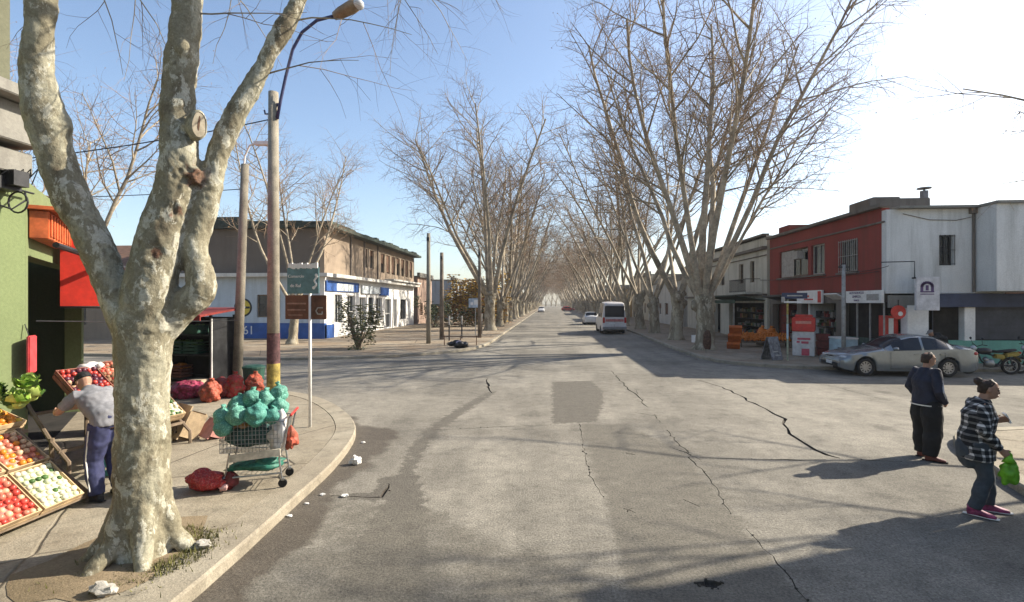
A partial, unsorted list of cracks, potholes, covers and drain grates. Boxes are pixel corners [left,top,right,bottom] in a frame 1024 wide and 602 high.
crack [613,373,902,602]
